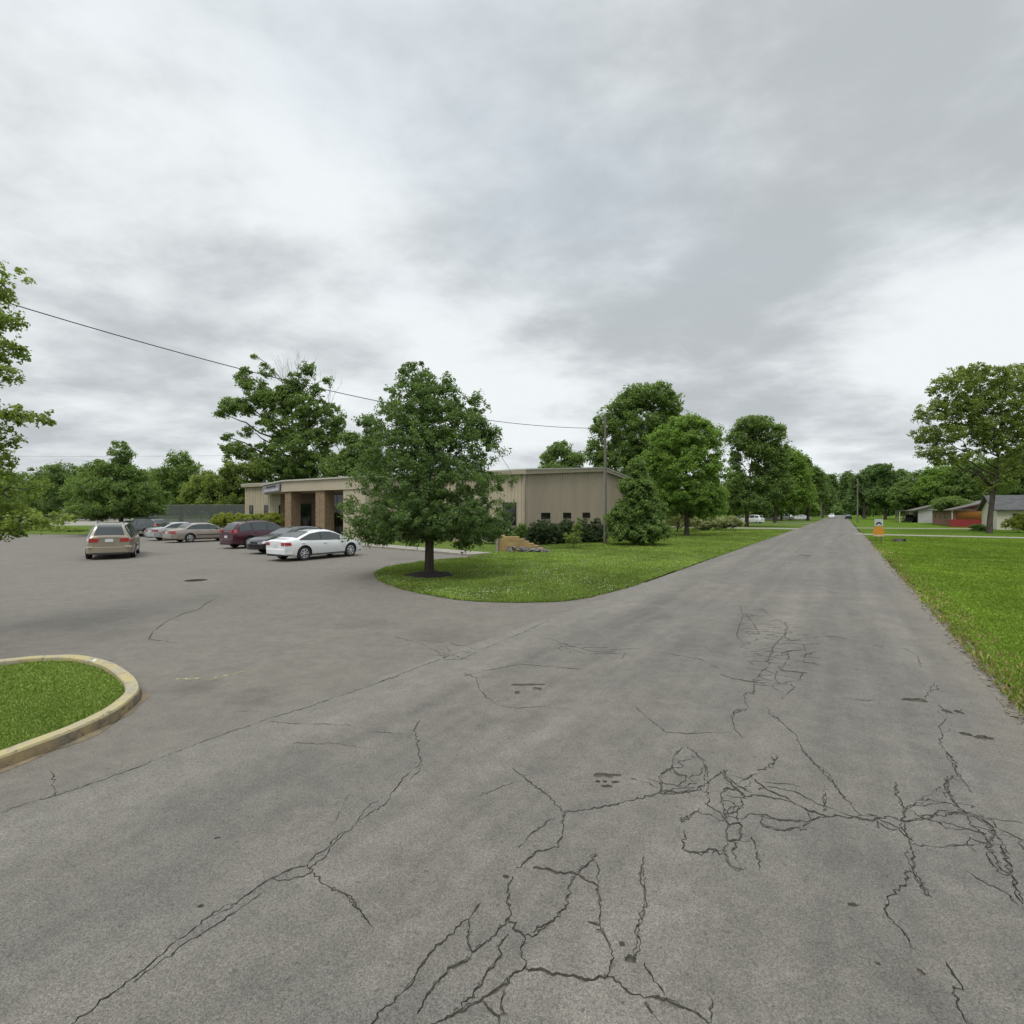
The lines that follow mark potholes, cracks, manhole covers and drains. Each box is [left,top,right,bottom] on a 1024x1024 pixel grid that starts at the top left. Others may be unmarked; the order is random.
crack [72,609,1024,1024]
pothole [593,773,622,788]
pothole [958,732,995,741]
